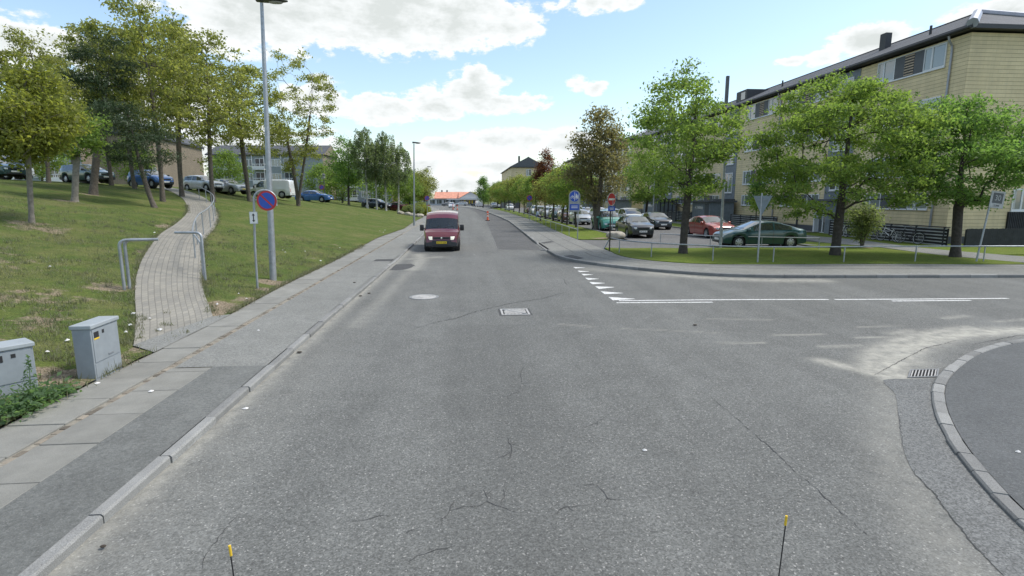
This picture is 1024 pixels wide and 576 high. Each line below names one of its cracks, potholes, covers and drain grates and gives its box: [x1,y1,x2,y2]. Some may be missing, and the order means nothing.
manhole cover [498,308,533,316]
crack [441,489,519,519]
drain grate [907,368,939,378]
